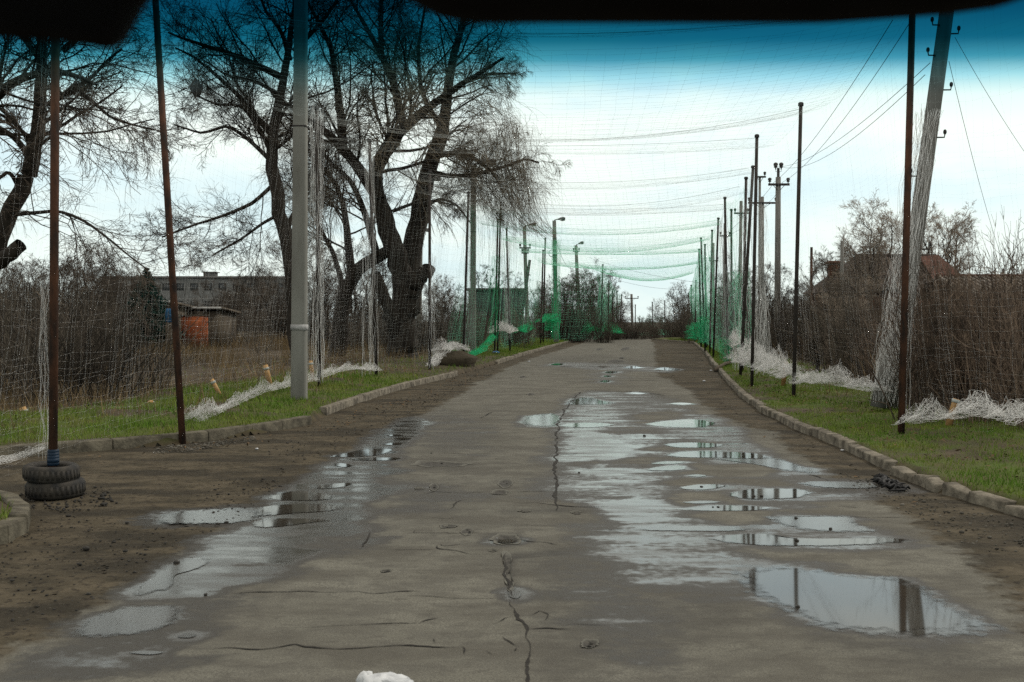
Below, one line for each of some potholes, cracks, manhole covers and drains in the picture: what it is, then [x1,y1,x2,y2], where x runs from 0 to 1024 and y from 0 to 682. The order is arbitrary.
pothole [581,639,599,648]
crack [213,618,442,650]
pothole [489,533,521,545]
crack [489,610,564,653]
